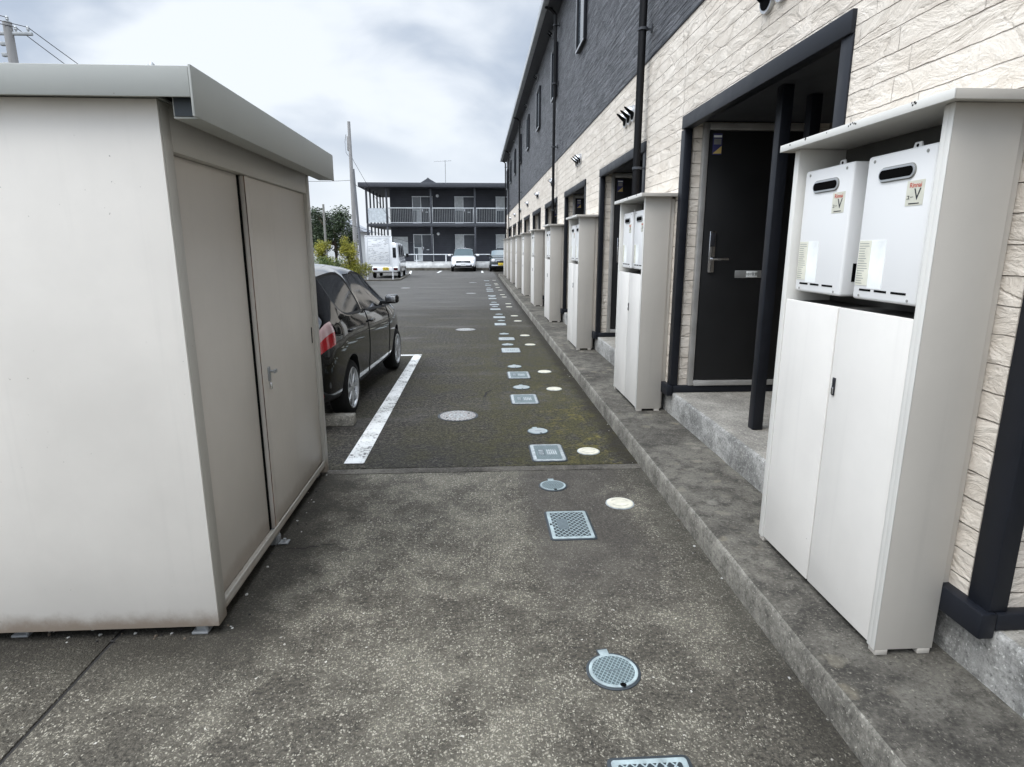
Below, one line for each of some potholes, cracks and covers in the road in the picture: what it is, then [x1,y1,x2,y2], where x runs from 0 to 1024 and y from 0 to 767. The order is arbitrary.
utility cover [586,648,641,691]
utility cover [527,427,549,435]
utility cover [539,478,567,492]
manhole cover [438,410,478,422]
